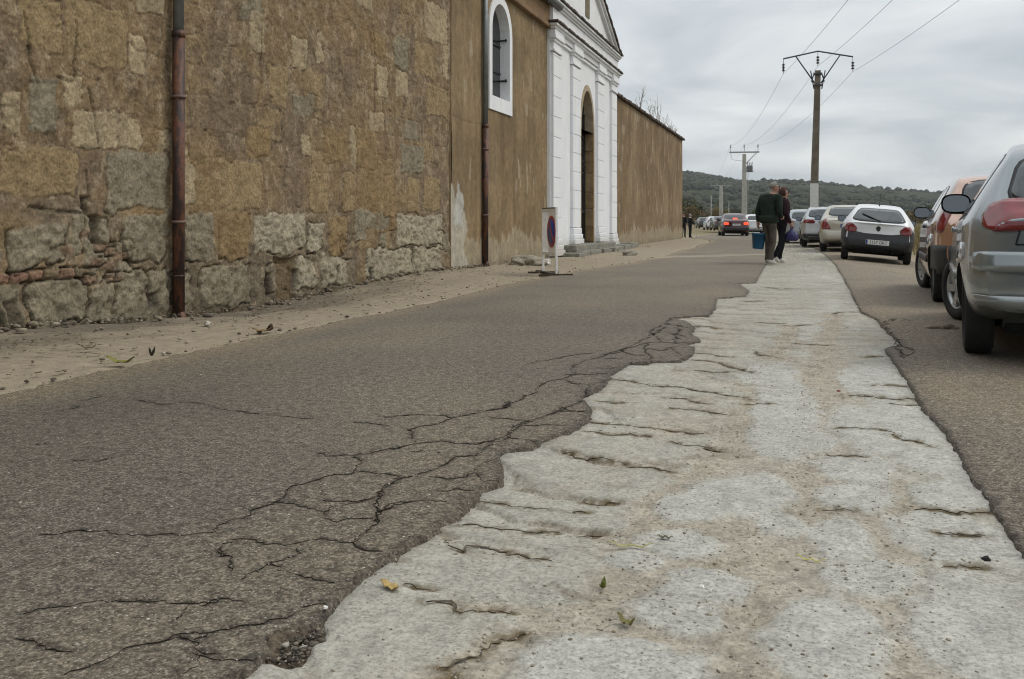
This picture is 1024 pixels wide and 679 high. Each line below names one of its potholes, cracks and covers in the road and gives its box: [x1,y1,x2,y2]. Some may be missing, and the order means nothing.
crack [871,319,914,357]
crack [850,385,917,406]
crack [16,327,720,675]
crack [604,318,771,415]
crack [838,427,930,446]
